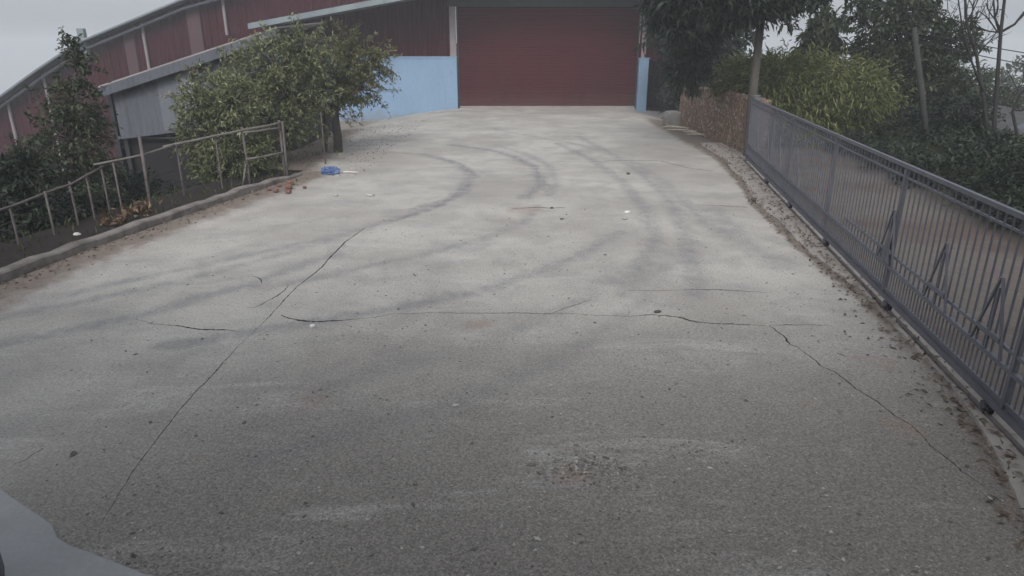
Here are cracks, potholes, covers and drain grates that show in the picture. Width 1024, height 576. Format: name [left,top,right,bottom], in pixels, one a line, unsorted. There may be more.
crack [773,324,986,488]
crack [101,228,760,523]
